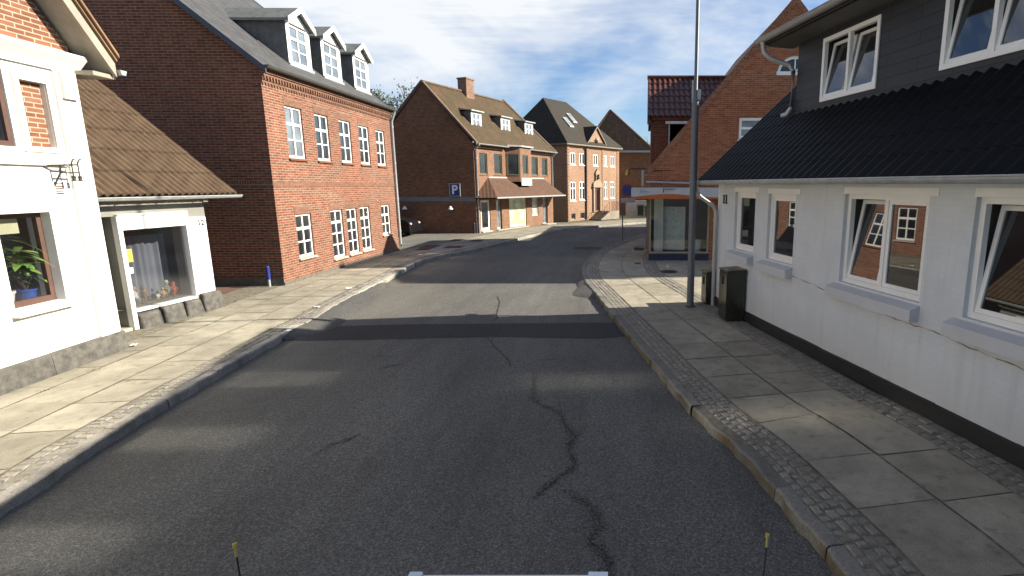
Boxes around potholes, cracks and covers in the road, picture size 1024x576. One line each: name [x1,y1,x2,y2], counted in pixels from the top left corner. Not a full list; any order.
crack [569,492,614,572]
crack [485,296,511,367]
crack [529,371,601,498]
